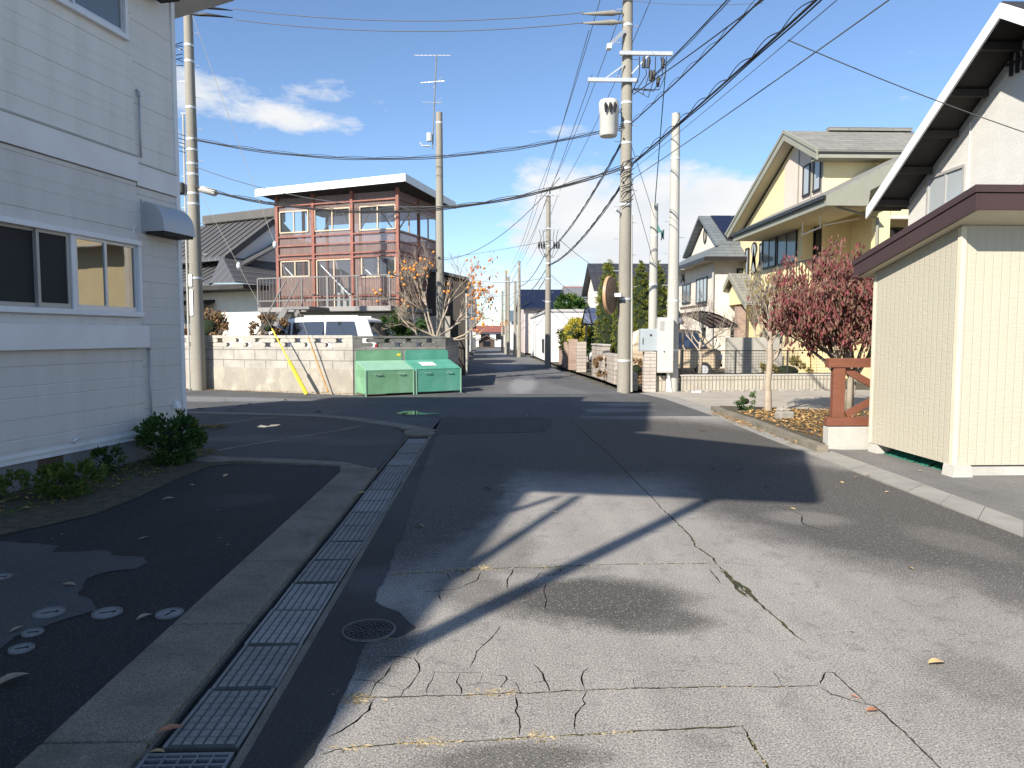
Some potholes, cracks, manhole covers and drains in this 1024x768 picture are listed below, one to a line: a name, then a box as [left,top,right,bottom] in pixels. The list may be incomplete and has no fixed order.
crack [405,420,807,643]
manhole cover [32,606,66,618]
drain grate [136,752,234,768]
manhole cover [341,618,396,643]
manhole cover [21,627,44,637]
manhole cover [8,642,35,654]
manhole cover [91,606,123,619]
crack [323,627,941,768]
manhole cover [155,607,184,619]
